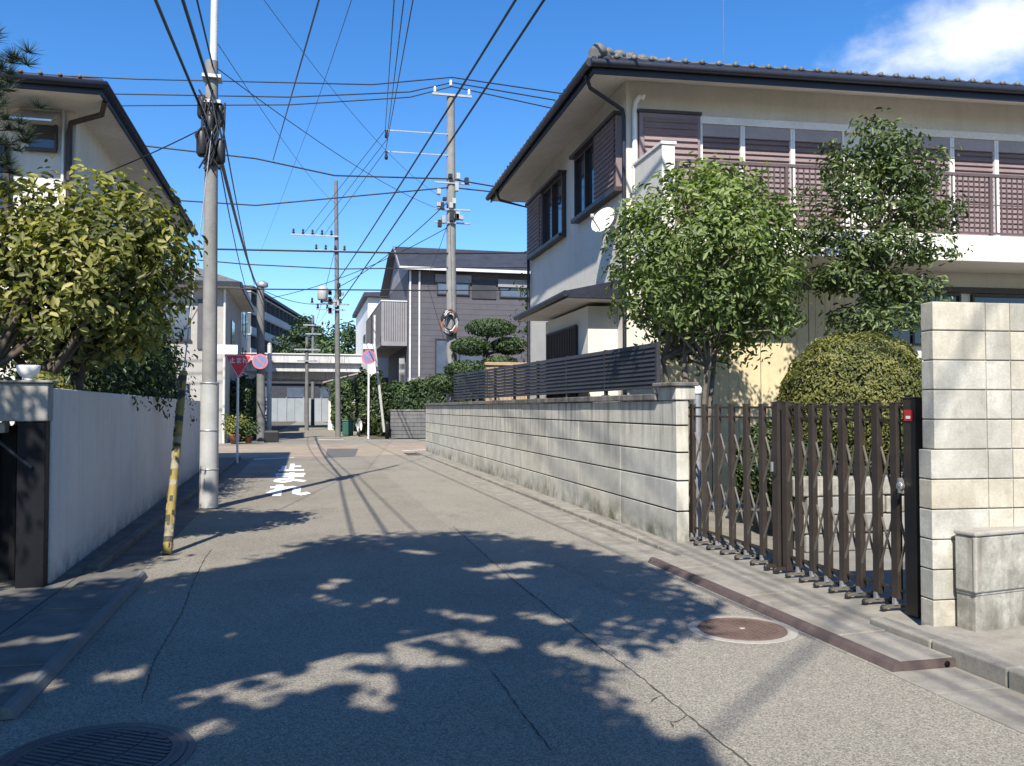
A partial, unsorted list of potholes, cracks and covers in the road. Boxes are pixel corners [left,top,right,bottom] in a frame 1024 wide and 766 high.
manhole cover [688,616,799,644]
crack [141,549,212,704]
manhole cover [0,722,196,766]
